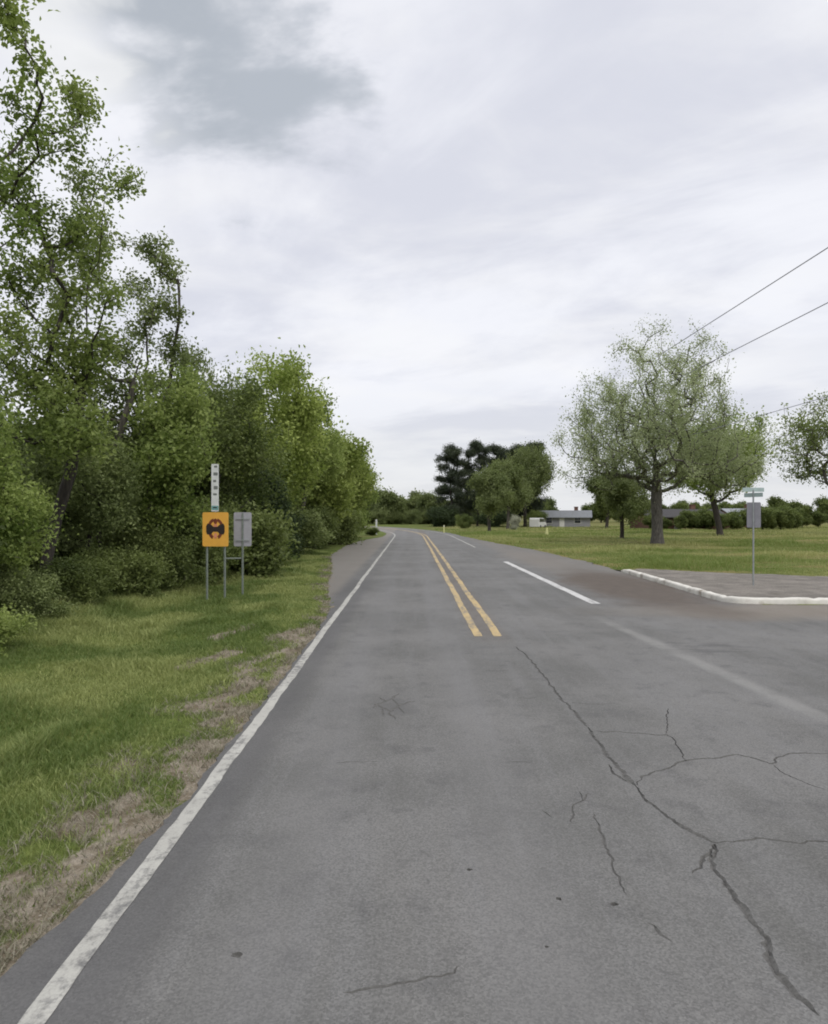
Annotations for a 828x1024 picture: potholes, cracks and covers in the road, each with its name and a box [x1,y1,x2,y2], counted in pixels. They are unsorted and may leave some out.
crack [344,965,459,994]
crack [373,693,415,719]
crack [506,647,828,1016]
